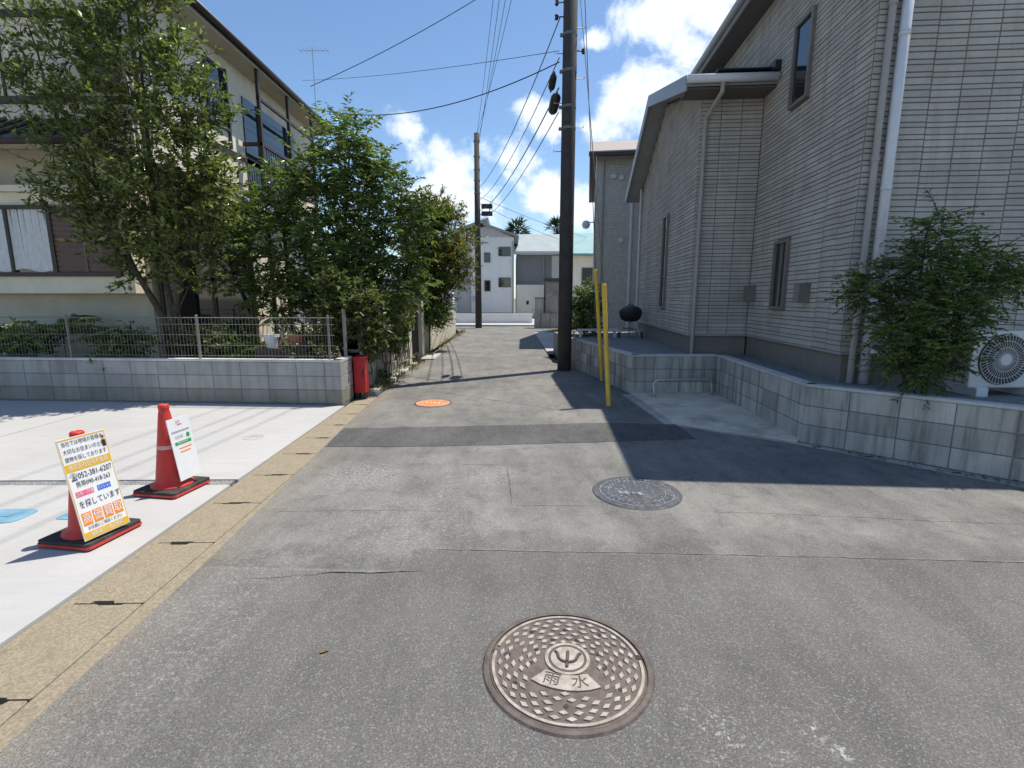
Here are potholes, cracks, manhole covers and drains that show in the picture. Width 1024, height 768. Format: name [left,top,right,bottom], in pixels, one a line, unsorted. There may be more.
manhole cover [482,612,655,739]
manhole cover [414,399,452,407]
manhole cover [592,476,682,510]
